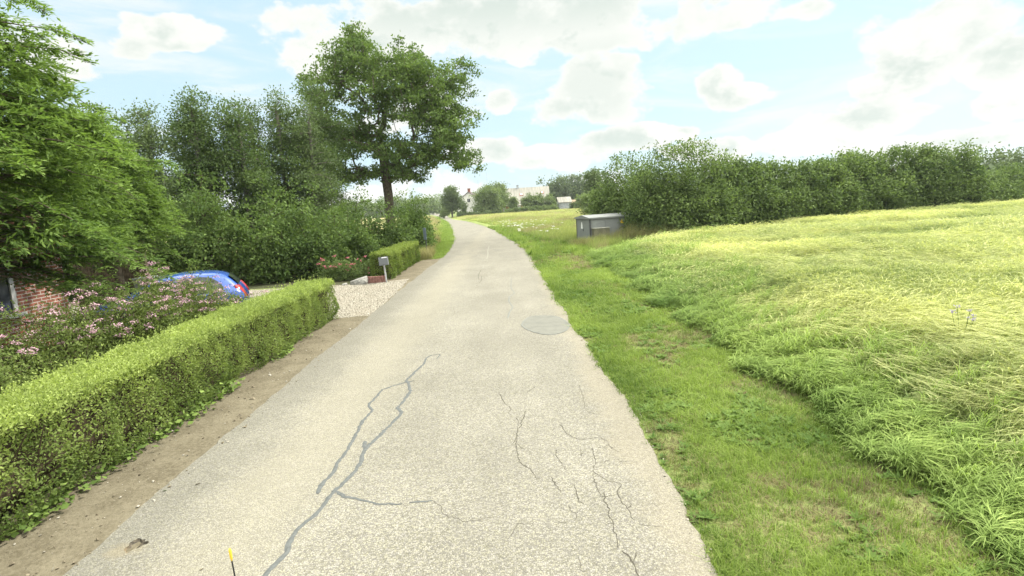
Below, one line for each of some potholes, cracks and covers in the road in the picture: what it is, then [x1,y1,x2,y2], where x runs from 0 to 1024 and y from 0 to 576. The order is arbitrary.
pothole [124,538,149,553]
crack [500,387,658,576]
